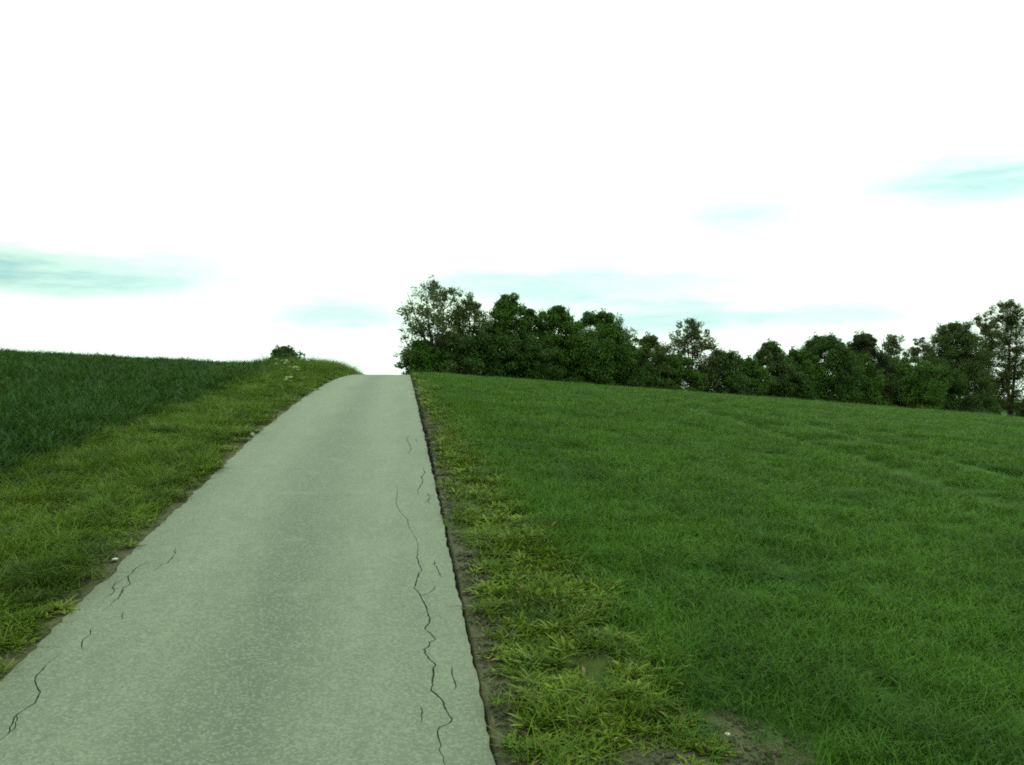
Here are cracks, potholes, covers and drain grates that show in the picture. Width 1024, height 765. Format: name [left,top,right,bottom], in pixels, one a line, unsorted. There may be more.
crack [396,491,457,765]
crack [104,549,176,620]
crack [2,662,50,739]
